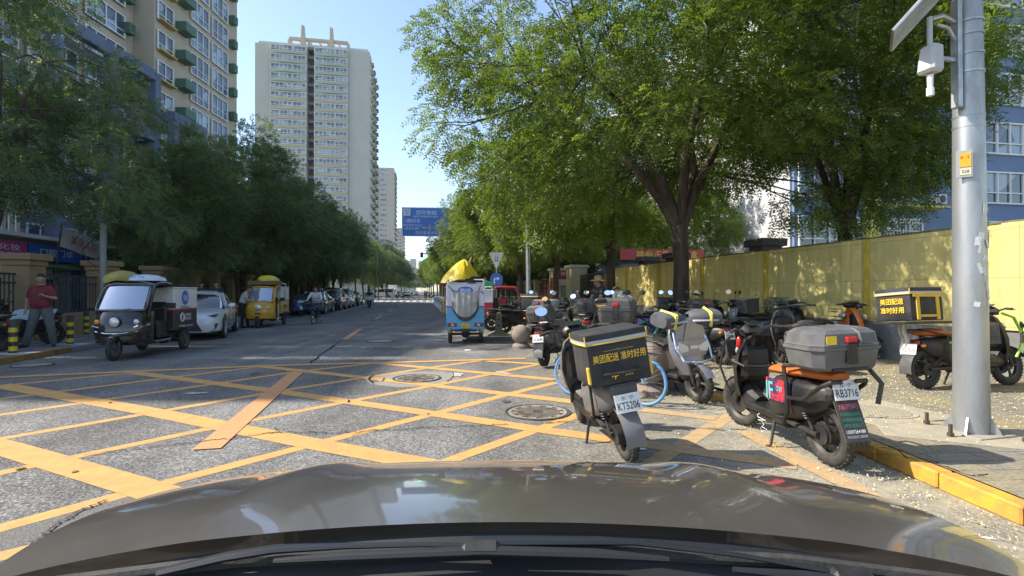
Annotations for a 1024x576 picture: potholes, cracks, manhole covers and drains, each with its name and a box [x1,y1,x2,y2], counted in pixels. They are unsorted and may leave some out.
crack [28,499,107,542]
manhole cover [392,374,441,383]
manhole cover [858,399,949,426]
manhole cover [505,404,571,421]
